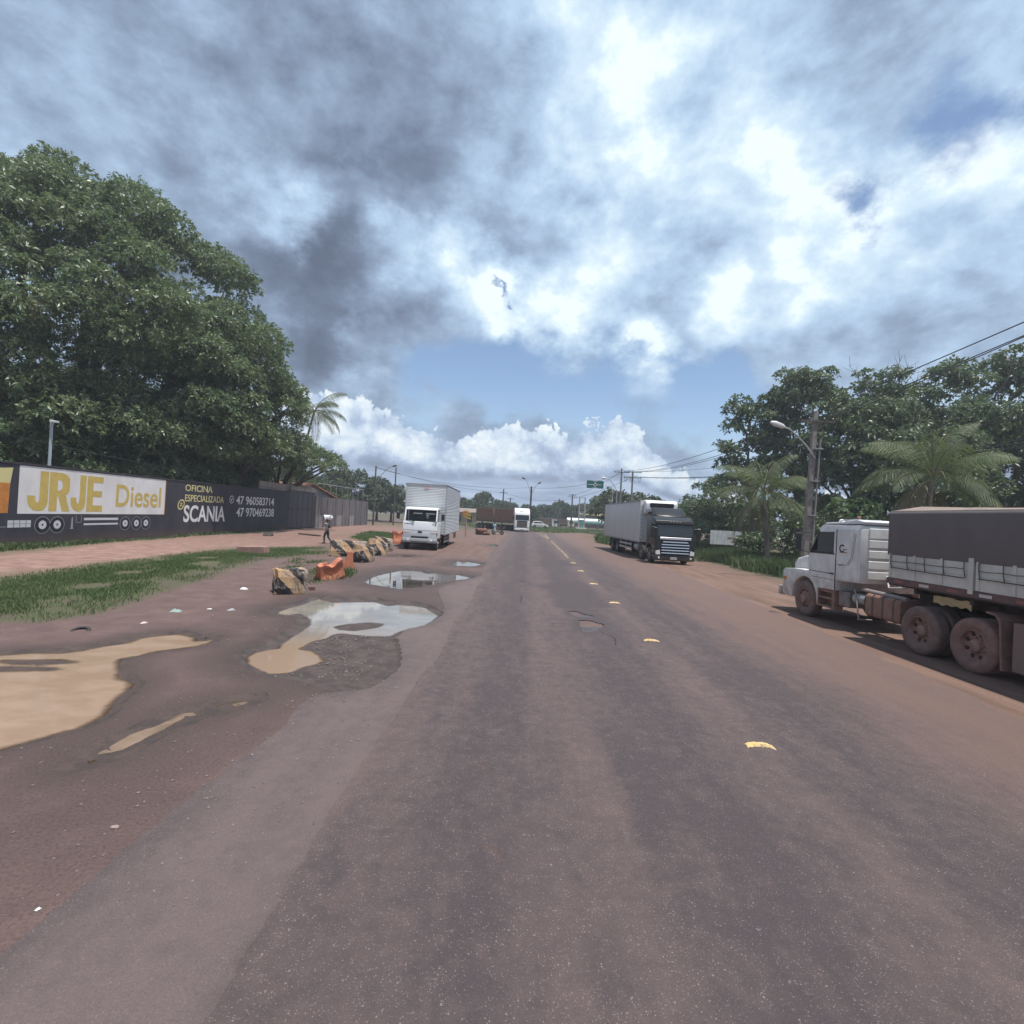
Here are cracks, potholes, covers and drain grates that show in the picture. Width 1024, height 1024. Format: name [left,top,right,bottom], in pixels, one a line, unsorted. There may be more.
pothole [238,595,443,691]
pothole [578,620,604,632]
pothole [0,631,226,753]
pothole [362,568,475,584]
